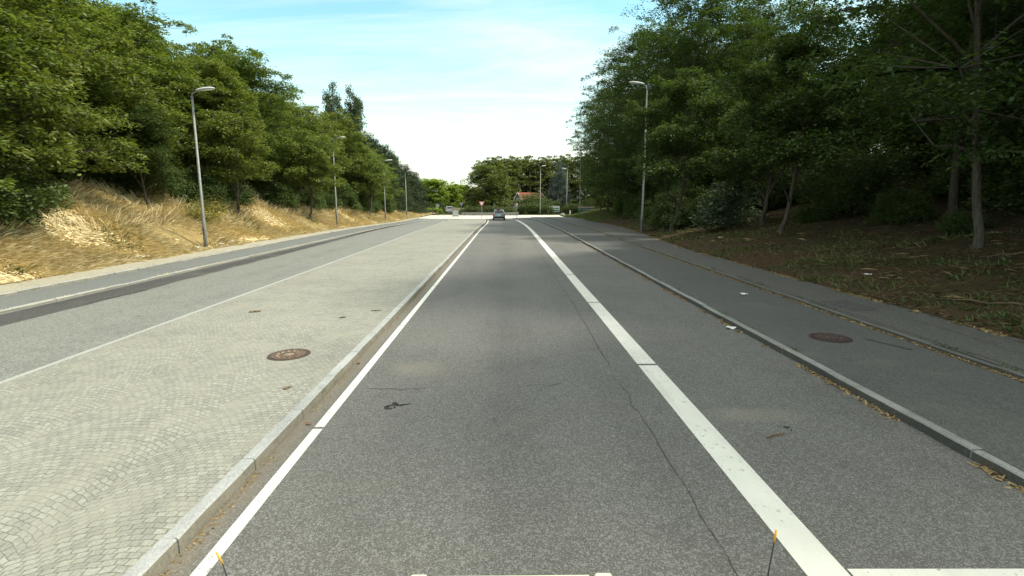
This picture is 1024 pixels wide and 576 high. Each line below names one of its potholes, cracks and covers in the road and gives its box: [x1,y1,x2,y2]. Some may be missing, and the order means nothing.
manhole cover [267,349,311,361]
manhole cover [808,333,853,343]
crack [621,386,738,575]
